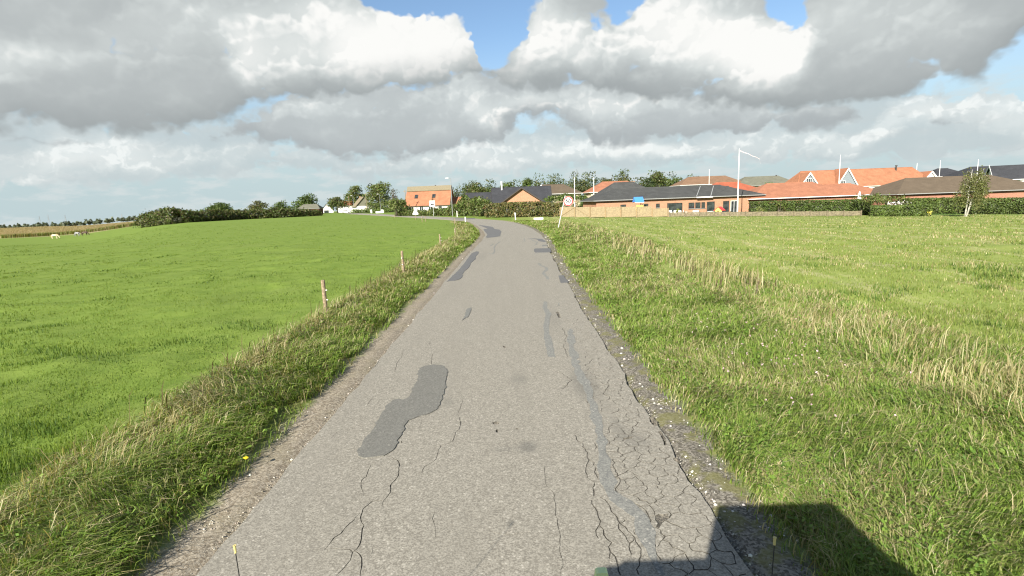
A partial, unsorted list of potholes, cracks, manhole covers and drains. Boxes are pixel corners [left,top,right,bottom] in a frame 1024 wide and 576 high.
crack [576,406,742,576]
crack [327,457,400,576]
